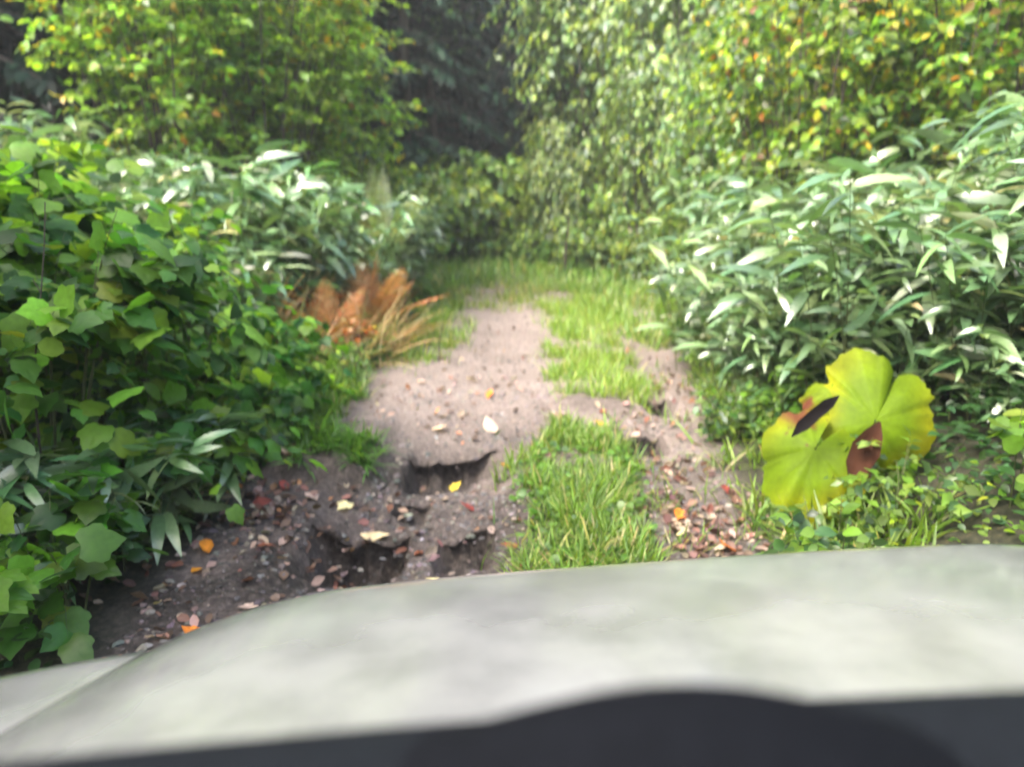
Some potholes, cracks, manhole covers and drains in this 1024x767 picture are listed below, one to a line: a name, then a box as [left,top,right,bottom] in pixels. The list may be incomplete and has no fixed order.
pothole [402,445,505,498]
pothole [288,521,414,592]
pothole [429,525,496,578]
